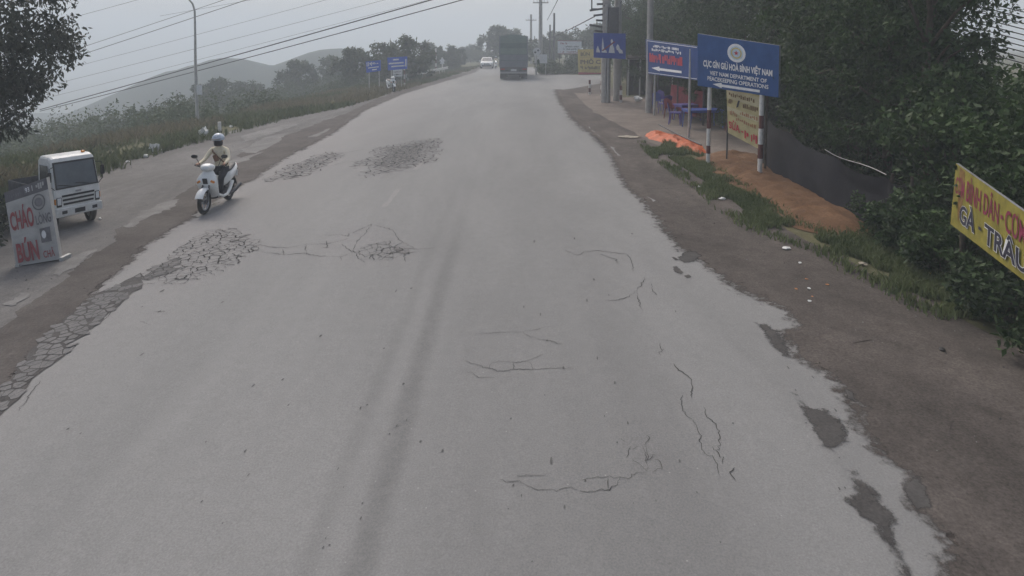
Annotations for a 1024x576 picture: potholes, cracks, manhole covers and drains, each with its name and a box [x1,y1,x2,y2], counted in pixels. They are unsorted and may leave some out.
crack [263,138,443,182]
crack [659,346,735,479]
crack [467,326,570,378]
crack [570,250,657,304]
crack [0,227,434,415]
crack [501,436,662,492]
